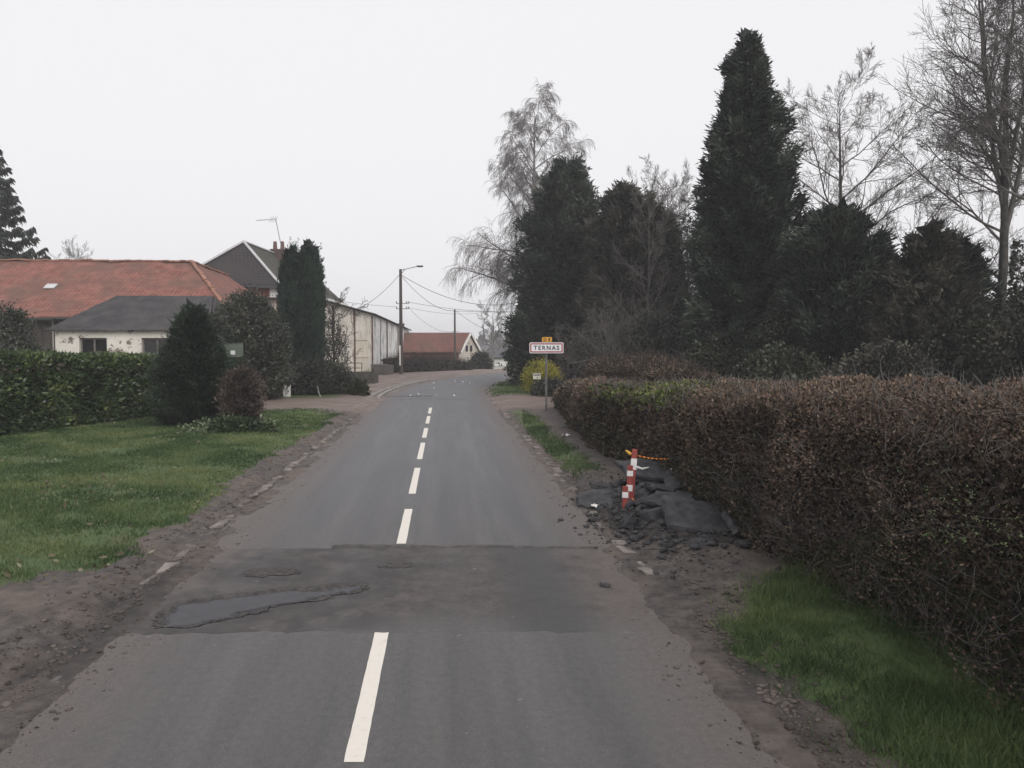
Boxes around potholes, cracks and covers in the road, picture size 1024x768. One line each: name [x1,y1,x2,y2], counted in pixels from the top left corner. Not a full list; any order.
pothole [151,582,369,628]
pothole [240,566,302,577]
